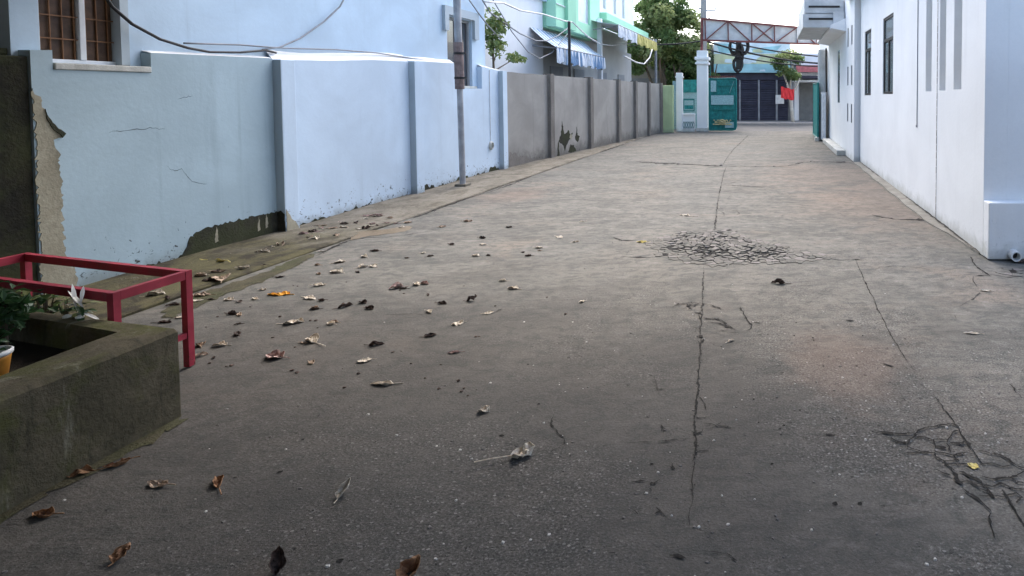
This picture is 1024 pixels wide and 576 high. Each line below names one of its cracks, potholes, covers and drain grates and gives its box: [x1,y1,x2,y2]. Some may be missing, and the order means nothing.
crack [666,302,763,347]
crack [988,500,1024,537]
crack [835,259,941,371]
